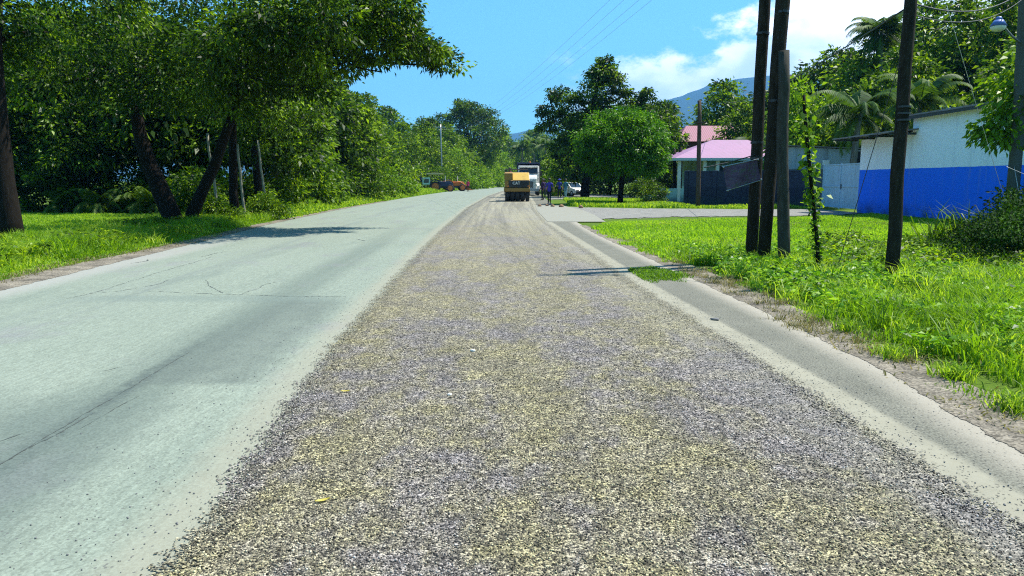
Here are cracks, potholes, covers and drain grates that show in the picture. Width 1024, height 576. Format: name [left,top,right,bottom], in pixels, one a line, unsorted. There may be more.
crack [76,253,333,297]
